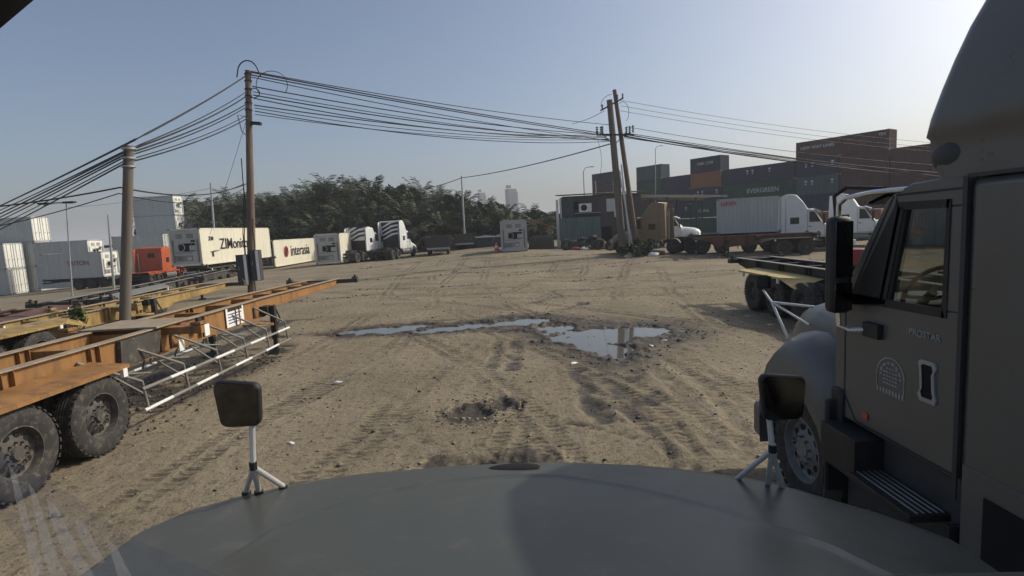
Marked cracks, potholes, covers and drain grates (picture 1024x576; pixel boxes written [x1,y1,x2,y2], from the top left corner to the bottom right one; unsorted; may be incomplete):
pothole [515,320,693,366]
pothole [435,393,522,430]
pothole [327,322,443,337]
pothole [405,315,582,335]
